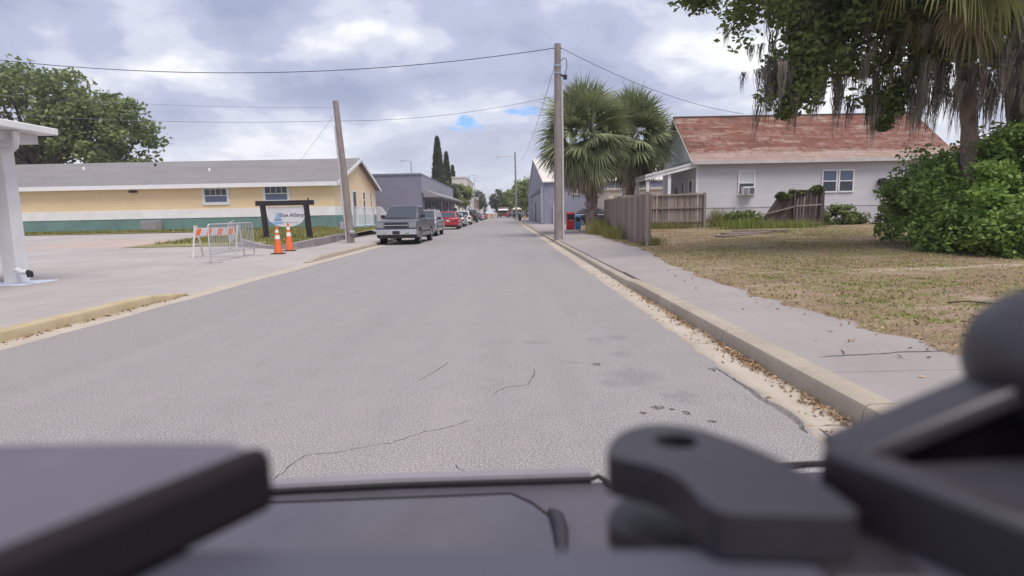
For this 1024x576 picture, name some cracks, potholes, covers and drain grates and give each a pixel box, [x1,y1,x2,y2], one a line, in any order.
crack [714,350,943,434]
crack [275,419,470,479]
